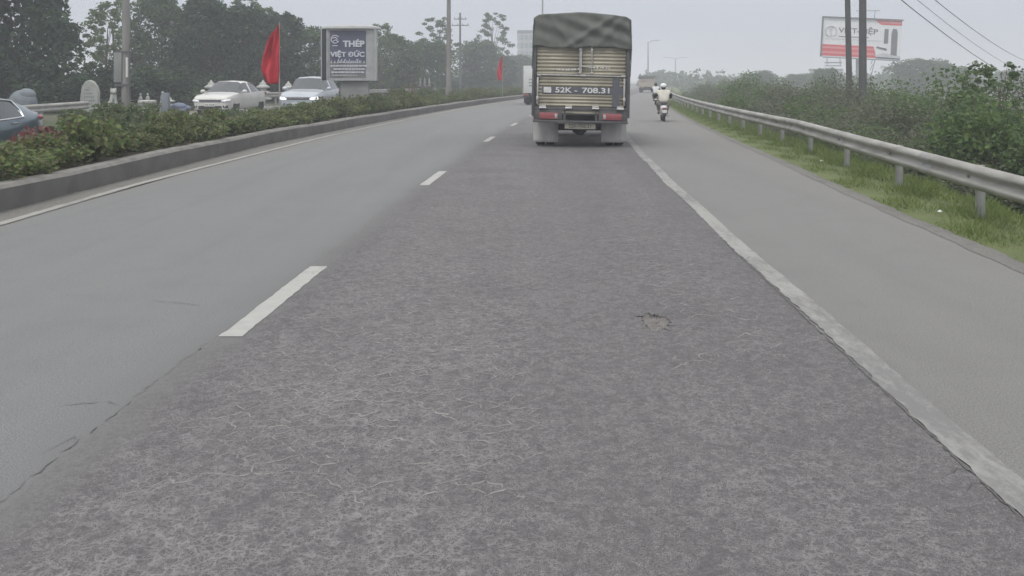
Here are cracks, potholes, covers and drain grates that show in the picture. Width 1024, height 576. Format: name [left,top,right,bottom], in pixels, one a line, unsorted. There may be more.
pothole [631,311,682,332]
